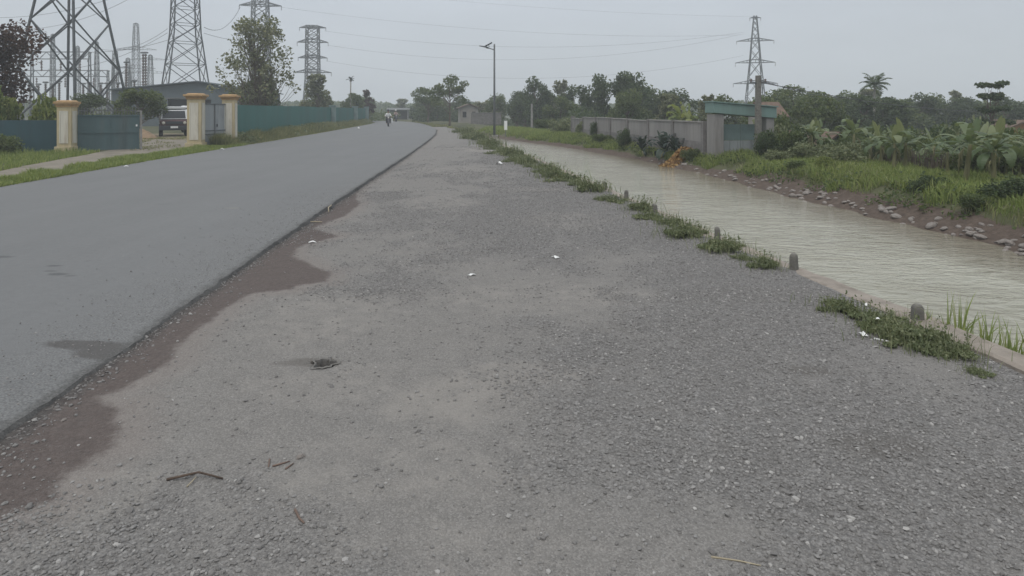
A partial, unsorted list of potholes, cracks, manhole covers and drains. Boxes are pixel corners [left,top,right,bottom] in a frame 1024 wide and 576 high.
pothole [310,358,341,369]
